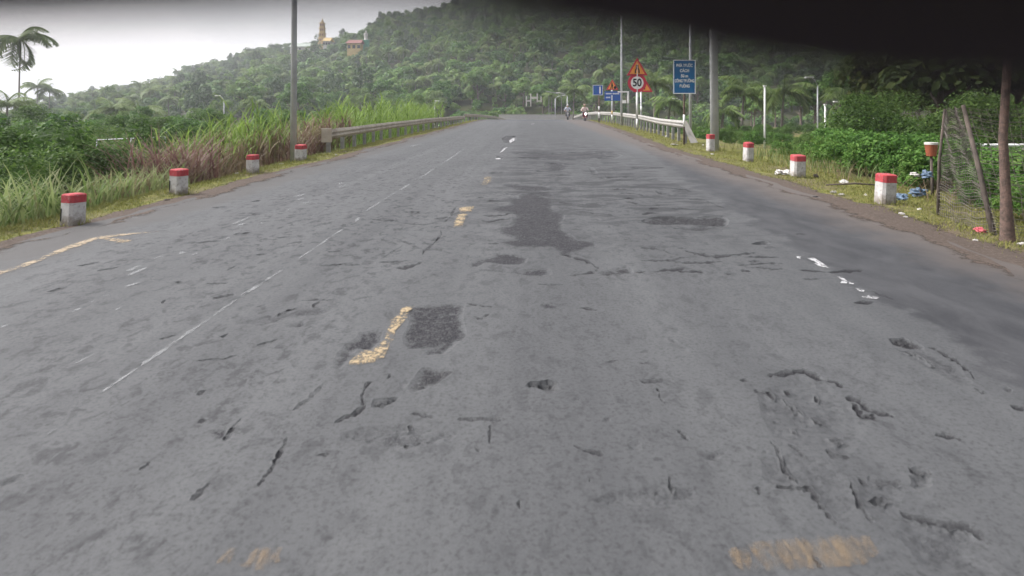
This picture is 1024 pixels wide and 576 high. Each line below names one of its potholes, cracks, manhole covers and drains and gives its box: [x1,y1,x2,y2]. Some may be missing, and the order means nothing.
crack [197,417,288,487]
crack [895,348,936,367]
pothole [525,379,561,391]
crack [739,368,991,547]
crack [190,482,211,501]
crack [292,373,392,423]
